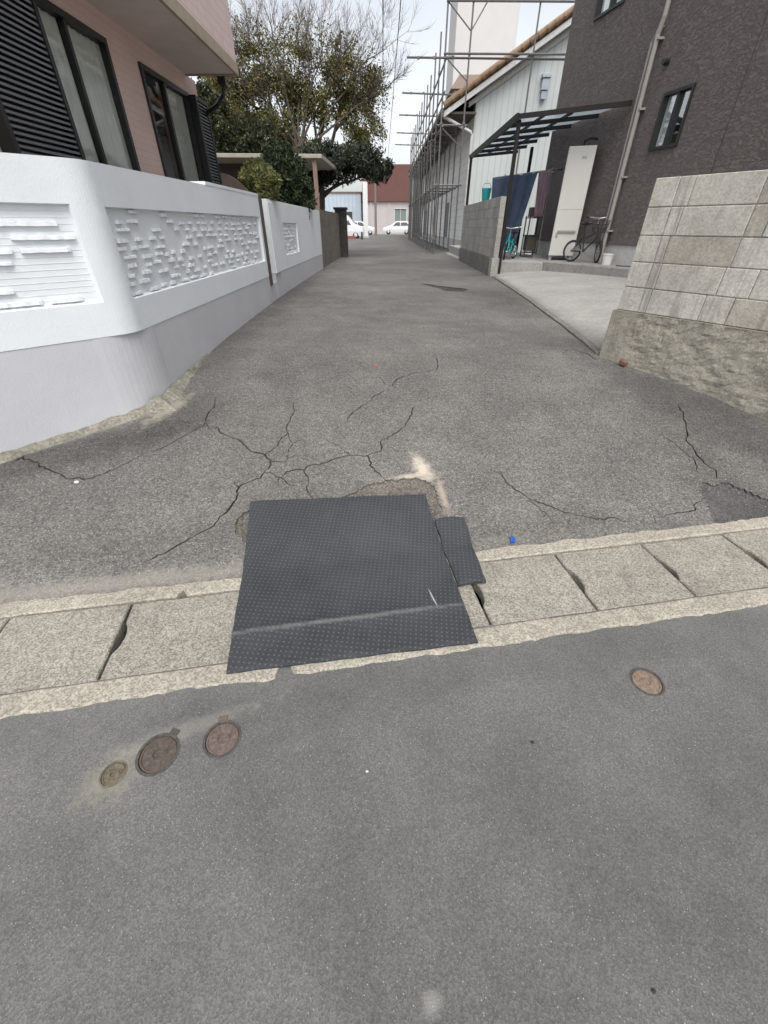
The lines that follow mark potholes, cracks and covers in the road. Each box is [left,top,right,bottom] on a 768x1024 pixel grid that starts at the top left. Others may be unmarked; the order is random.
crack [660,405,717,478]
manhole cover [135,727,181,777]
manhole cover [202,715,242,758]
manhole cover [99,760,128,788]
crack [118,397,415,563]
manhole cover [630,667,665,696]
crack [654,499,702,523]
crack [16,456,120,480]
